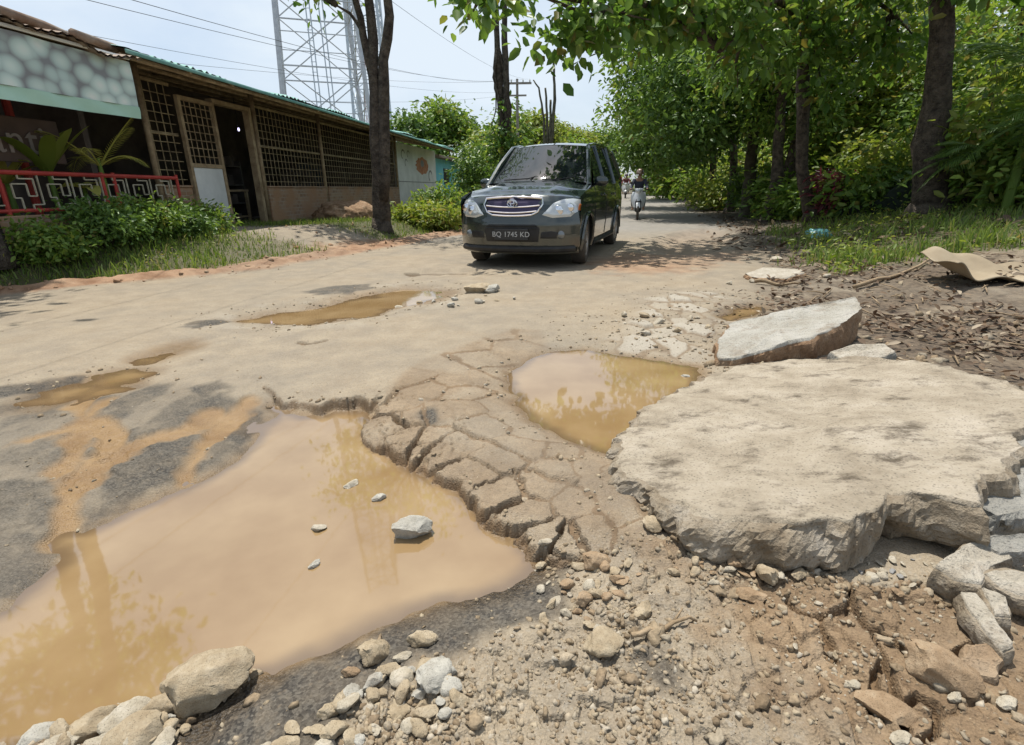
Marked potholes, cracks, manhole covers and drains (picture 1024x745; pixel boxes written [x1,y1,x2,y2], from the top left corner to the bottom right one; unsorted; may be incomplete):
pothole [223,284,463,327]
pothole [0,366,163,414]
crack [361,291,728,563]
pothole [504,345,712,456]
pothole [0,391,567,745]
